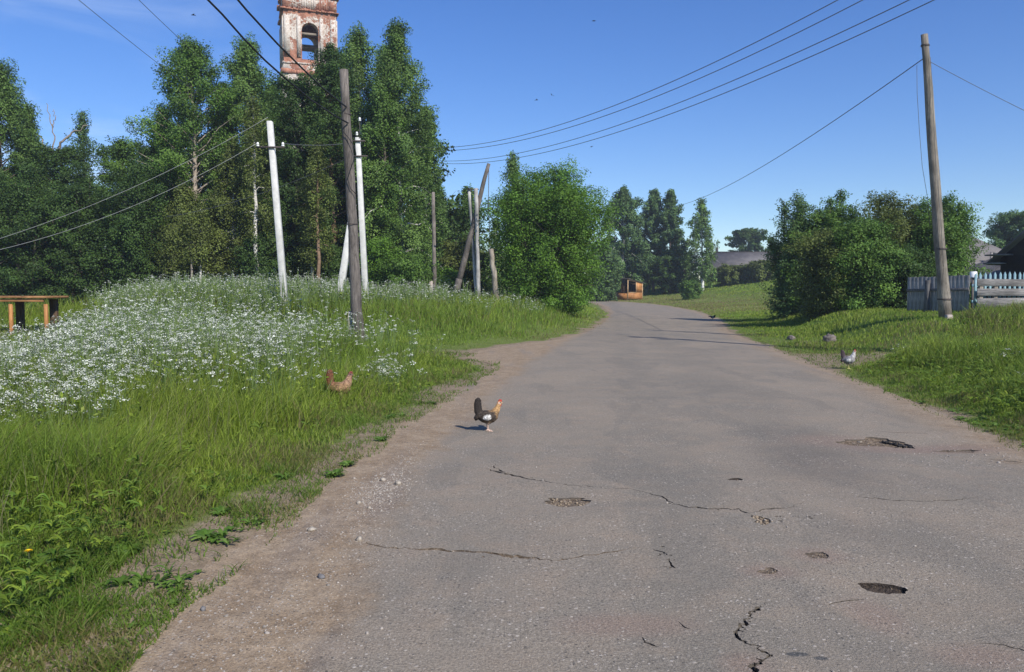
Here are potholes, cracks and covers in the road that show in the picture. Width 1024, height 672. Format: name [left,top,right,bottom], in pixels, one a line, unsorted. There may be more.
pothole [545,497,591,507]
pothole [751,515,773,525]
pothole [857,583,908,594]
pothole [836,437,915,449]
crack [490,464,816,521]
crack [366,542,675,569]
crack [732,601,773,672]
